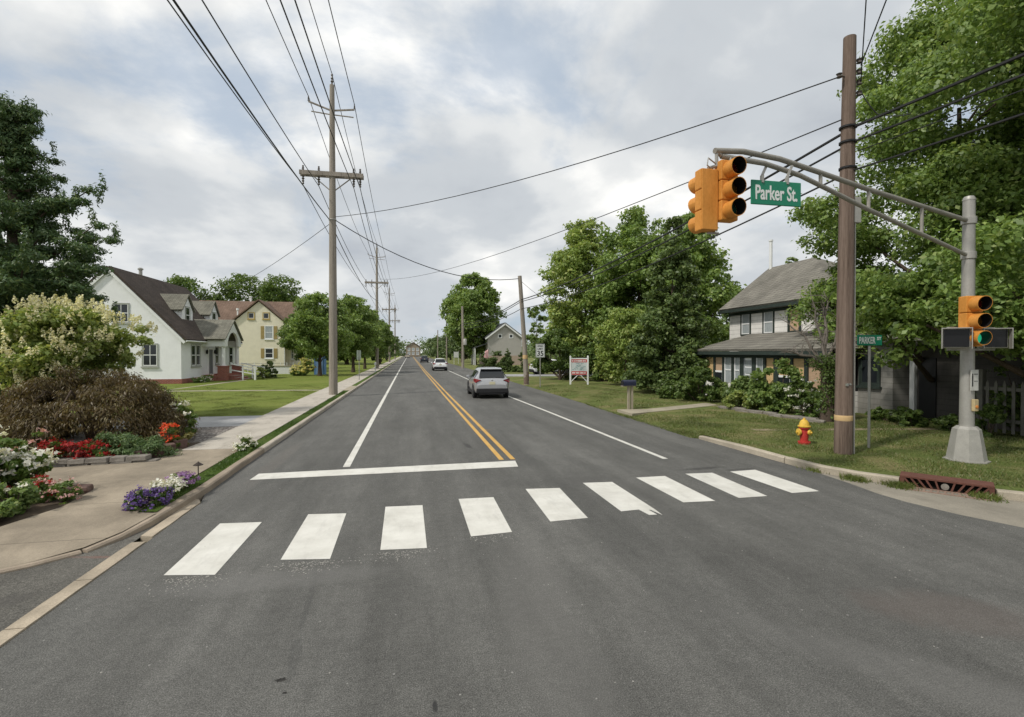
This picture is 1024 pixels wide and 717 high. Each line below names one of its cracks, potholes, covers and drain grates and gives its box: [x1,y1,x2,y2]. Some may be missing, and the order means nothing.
drain grate [900,471,995,501]
